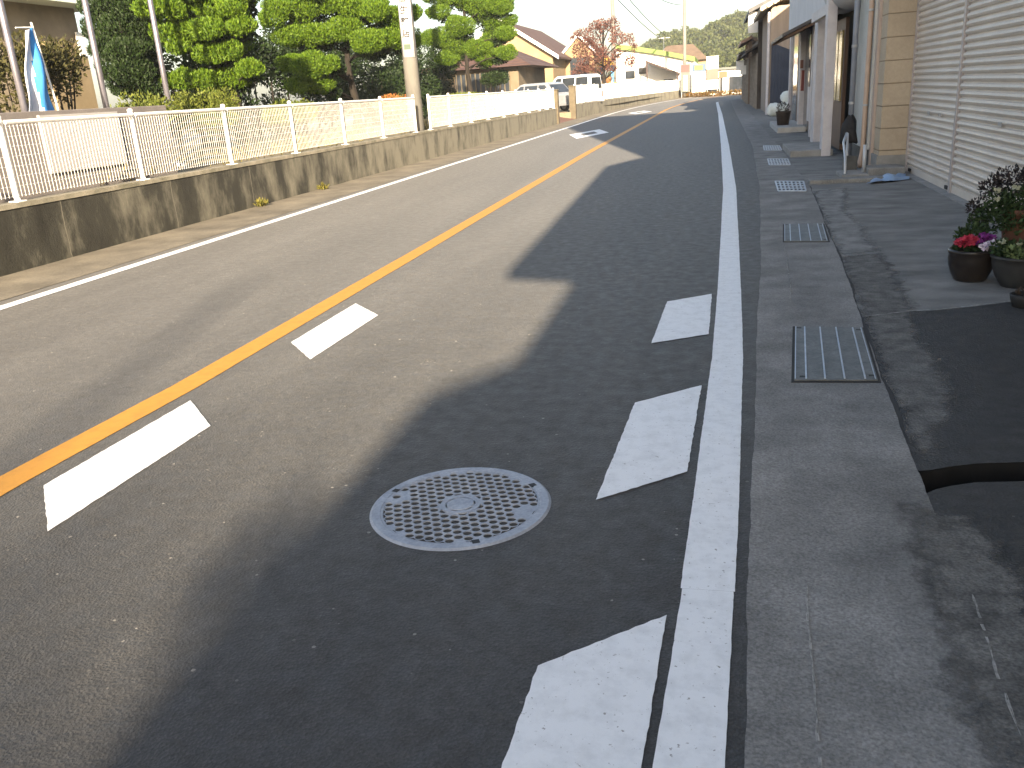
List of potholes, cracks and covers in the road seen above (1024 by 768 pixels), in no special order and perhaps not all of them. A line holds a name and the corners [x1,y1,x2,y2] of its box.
drain grate [791,326,881,383]
drain grate [774,181,807,192]
crack [806,582,823,768]
crack [972,594,1022,736]
drain grate [783,223,830,242]
manhole cover [369,467,551,551]
